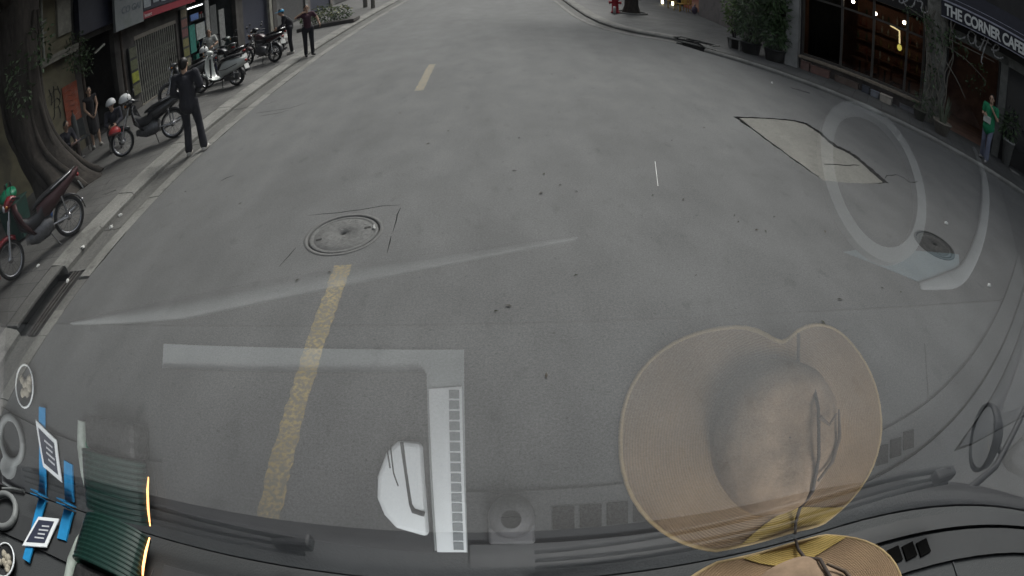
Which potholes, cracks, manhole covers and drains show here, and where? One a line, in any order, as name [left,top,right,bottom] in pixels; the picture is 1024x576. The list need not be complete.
manhole cover [304,214,384,256]
manhole cover [914,230,955,260]
crack [283,205,401,262]
crack [735,117,915,183]
drain grate [7,265,87,337]
drain grate [673,36,720,52]
